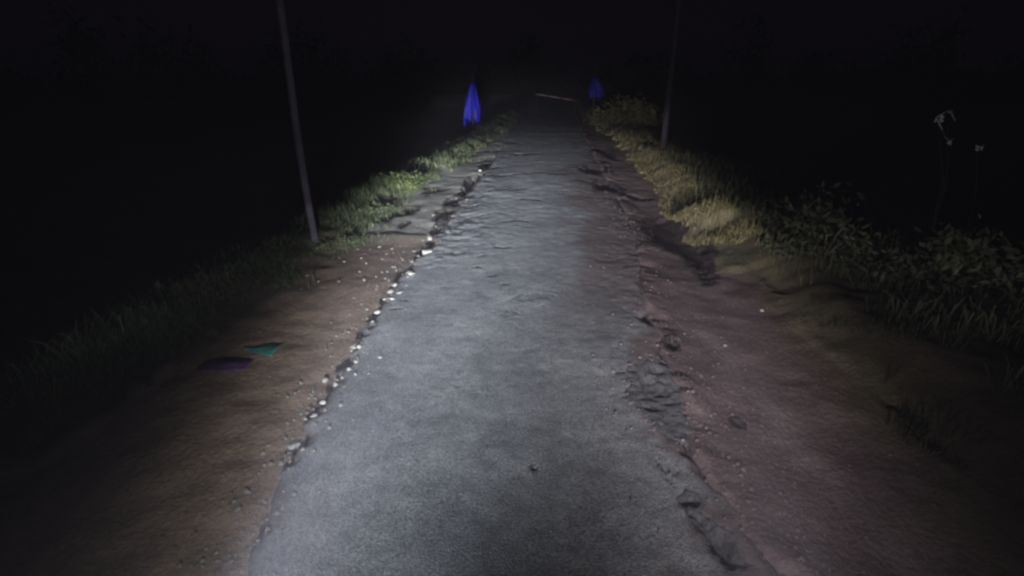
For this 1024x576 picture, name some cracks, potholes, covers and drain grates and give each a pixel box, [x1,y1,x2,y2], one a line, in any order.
pothole [685,504,753,574]
pothole [675,489,705,512]
crack [433,142,595,285]
pothole [615,360,695,450]
